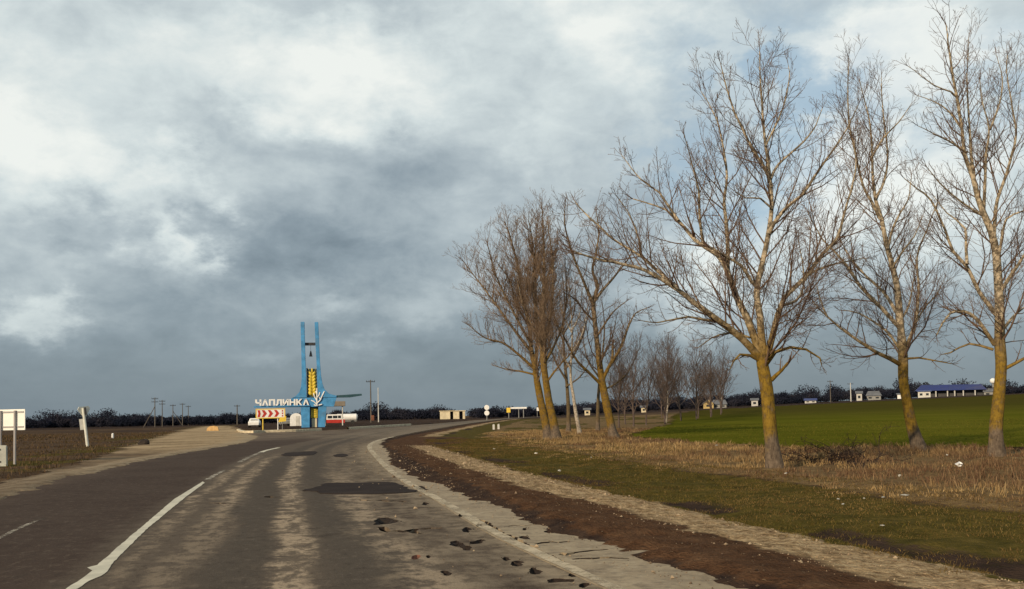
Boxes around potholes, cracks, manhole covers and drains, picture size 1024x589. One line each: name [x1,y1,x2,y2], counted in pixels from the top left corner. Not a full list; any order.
pothole [373,517,402,525]
pothole [449,541,472,550]
